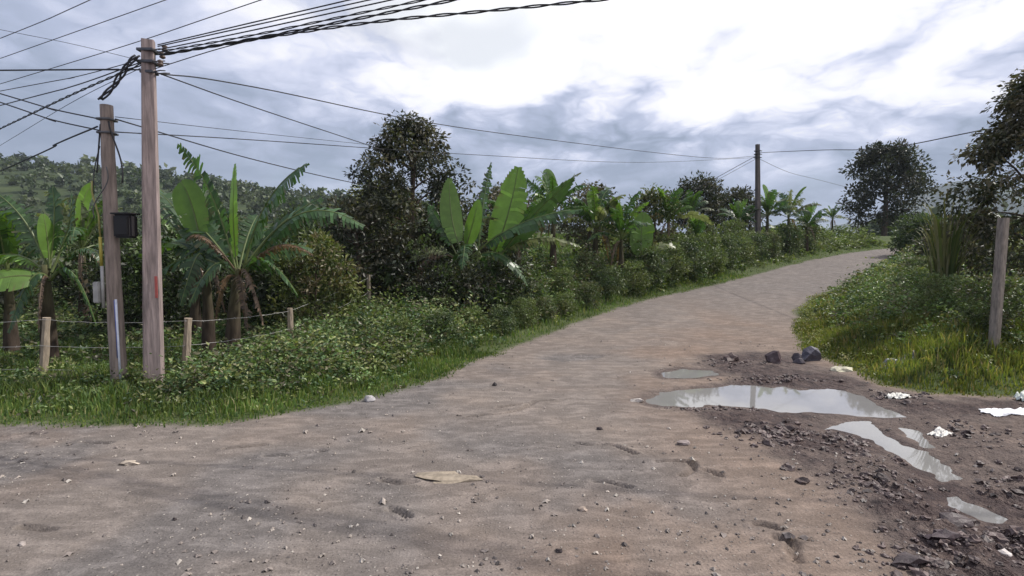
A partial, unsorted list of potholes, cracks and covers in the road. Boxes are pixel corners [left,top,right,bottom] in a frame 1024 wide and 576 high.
pothole [634,382,923,420]
pothole [651,366,729,379]
